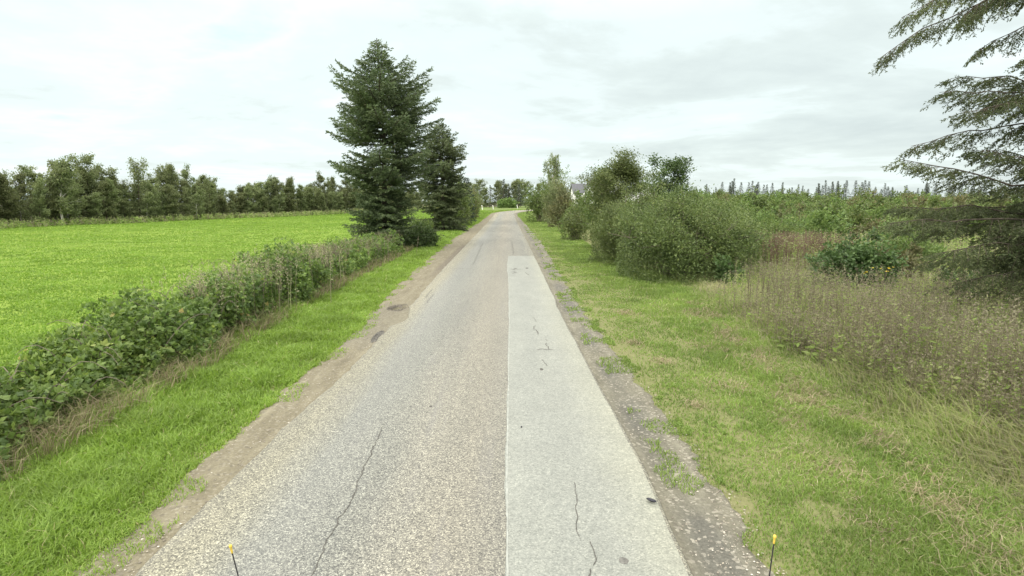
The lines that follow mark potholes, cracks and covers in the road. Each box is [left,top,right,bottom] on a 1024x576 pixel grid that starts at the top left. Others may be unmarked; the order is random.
crack [311,421,385,576]
crack [574,482,597,576]
